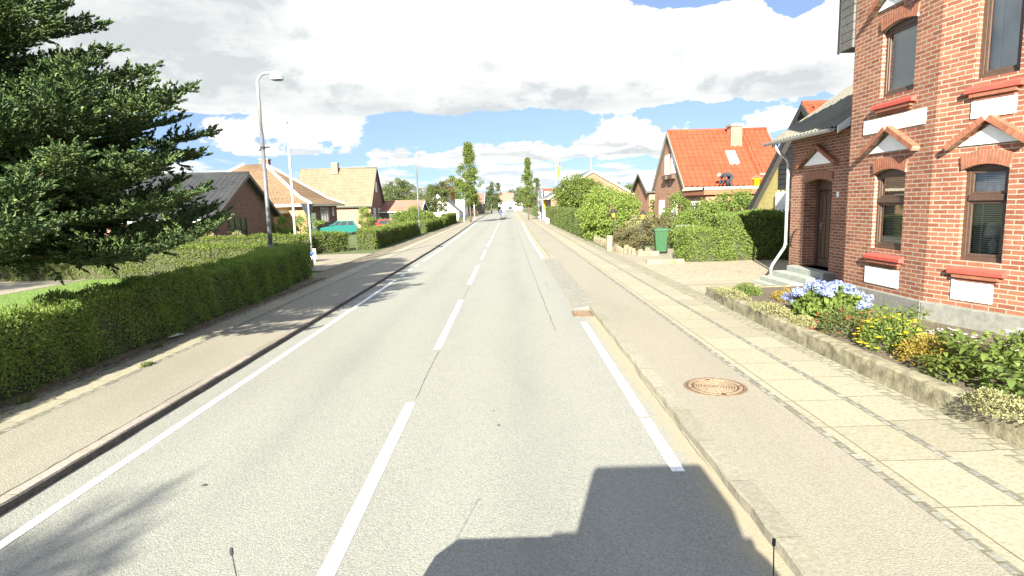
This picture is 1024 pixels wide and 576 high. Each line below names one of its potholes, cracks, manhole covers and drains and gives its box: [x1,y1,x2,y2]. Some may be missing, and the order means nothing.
manhole cover [684,378,748,397]
crack [516,224,555,328]
